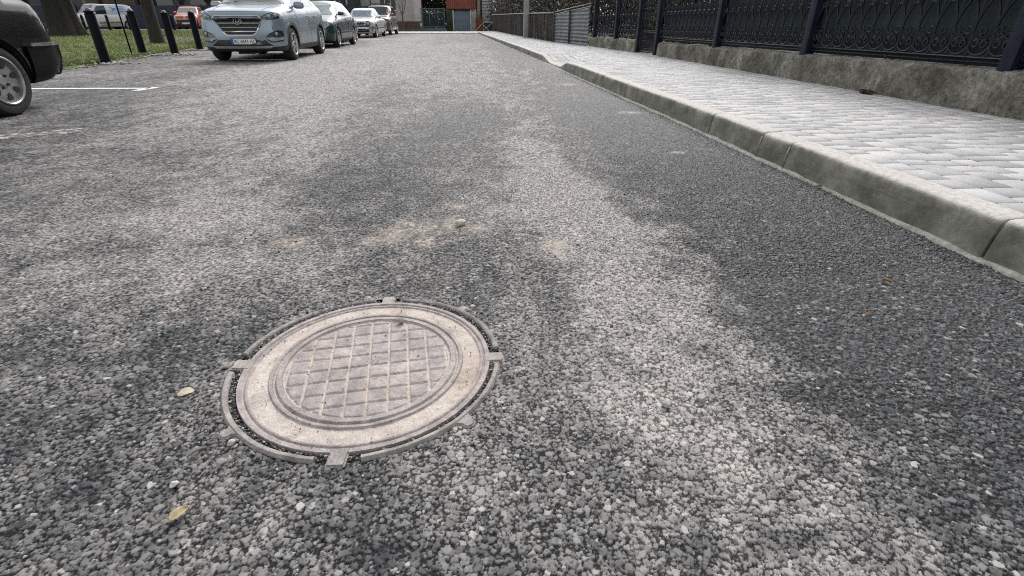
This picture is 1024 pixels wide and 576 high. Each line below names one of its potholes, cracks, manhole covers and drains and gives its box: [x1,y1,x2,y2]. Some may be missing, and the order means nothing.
manhole cover [218,297,504,469]
